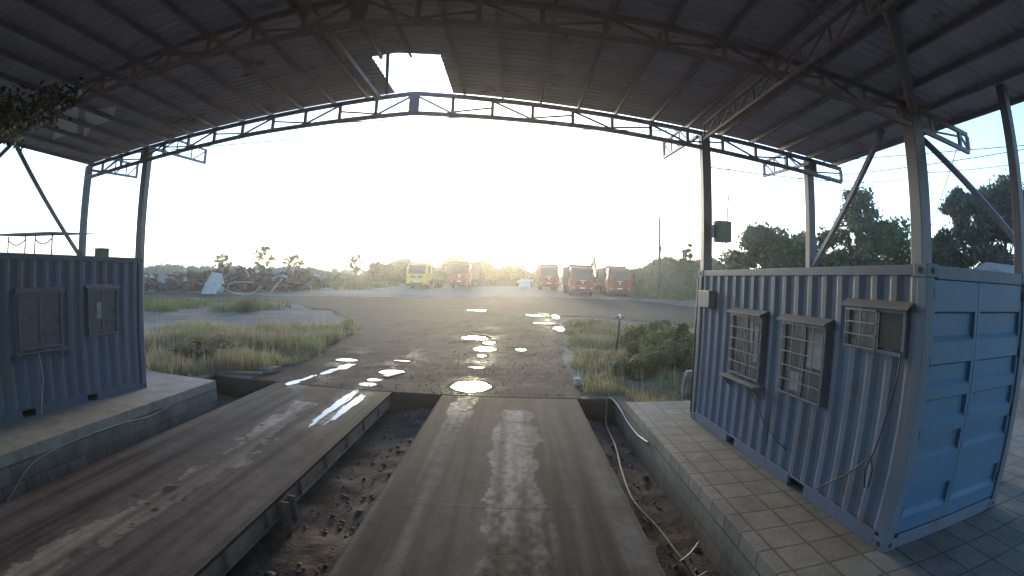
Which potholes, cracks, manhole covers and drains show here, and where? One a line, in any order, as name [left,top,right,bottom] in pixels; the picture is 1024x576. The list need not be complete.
pothole [445,380,496,393]
